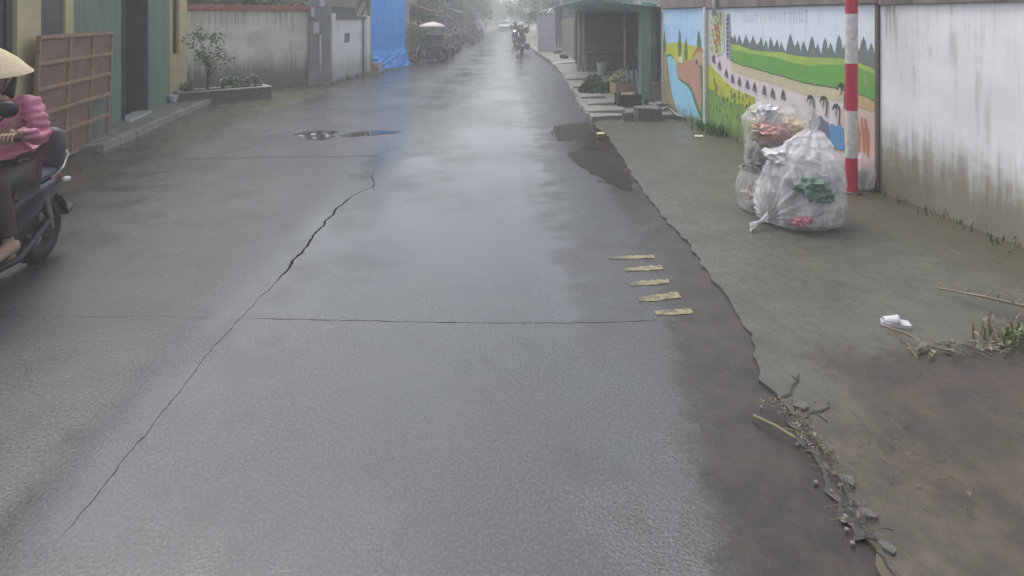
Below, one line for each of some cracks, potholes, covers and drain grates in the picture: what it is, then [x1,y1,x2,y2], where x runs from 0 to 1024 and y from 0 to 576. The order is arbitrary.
crack [56,170,375,542]
pothole [293,131,339,141]
